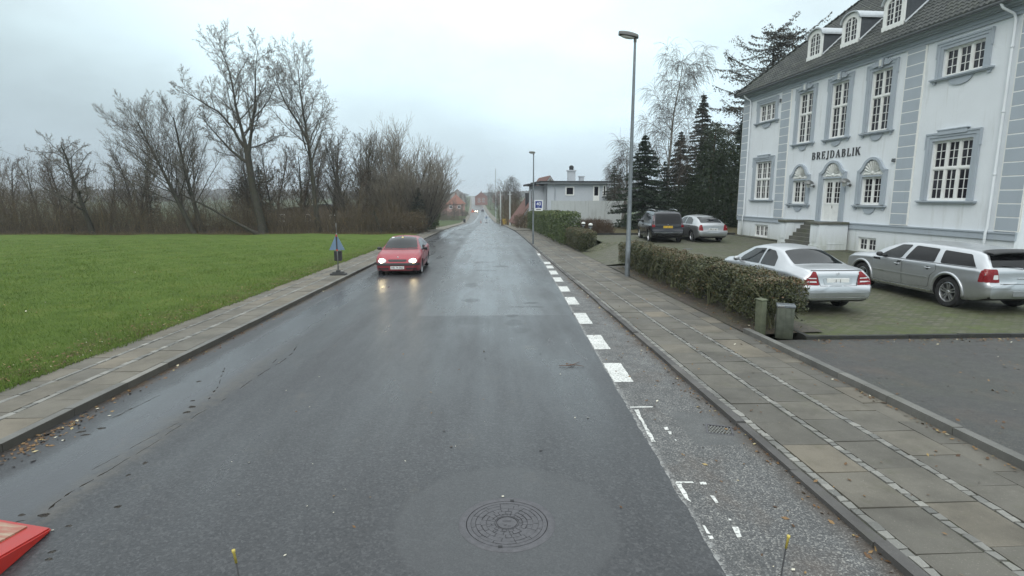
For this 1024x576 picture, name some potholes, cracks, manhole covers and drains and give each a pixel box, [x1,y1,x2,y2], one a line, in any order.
drain grate [705,424,734,436]
manhole cover [459,498,555,553]
